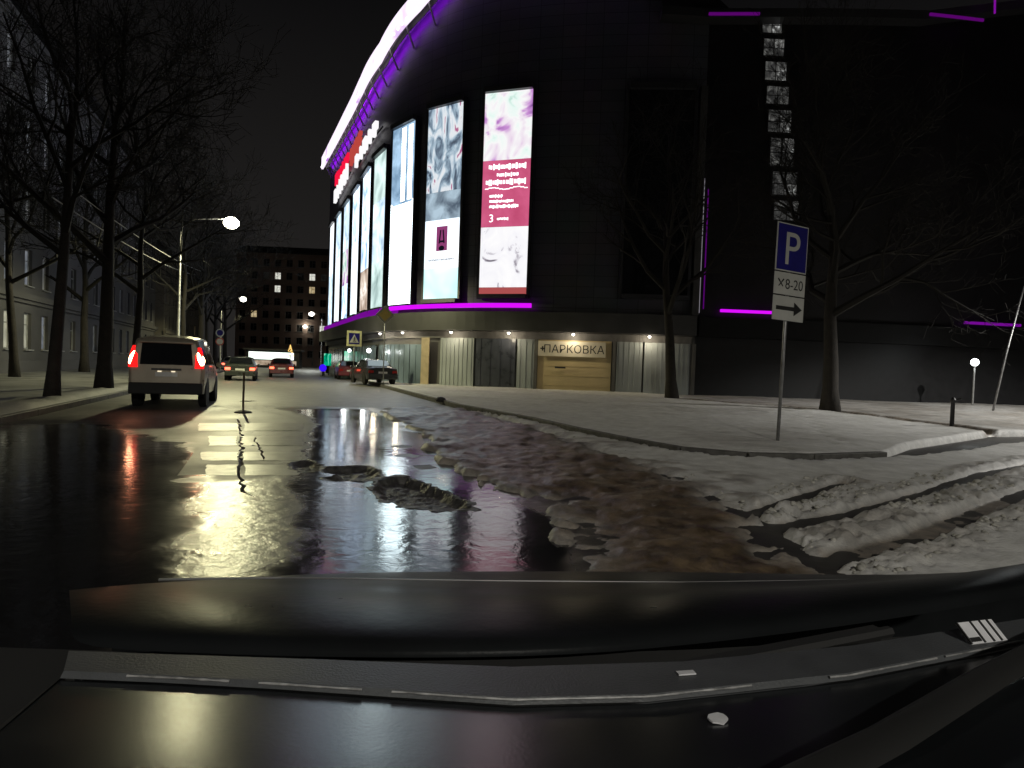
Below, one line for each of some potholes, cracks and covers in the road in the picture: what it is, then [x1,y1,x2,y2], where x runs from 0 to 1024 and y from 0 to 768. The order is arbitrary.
pothole [317,465,385,483]
pothole [366,474,482,513]
